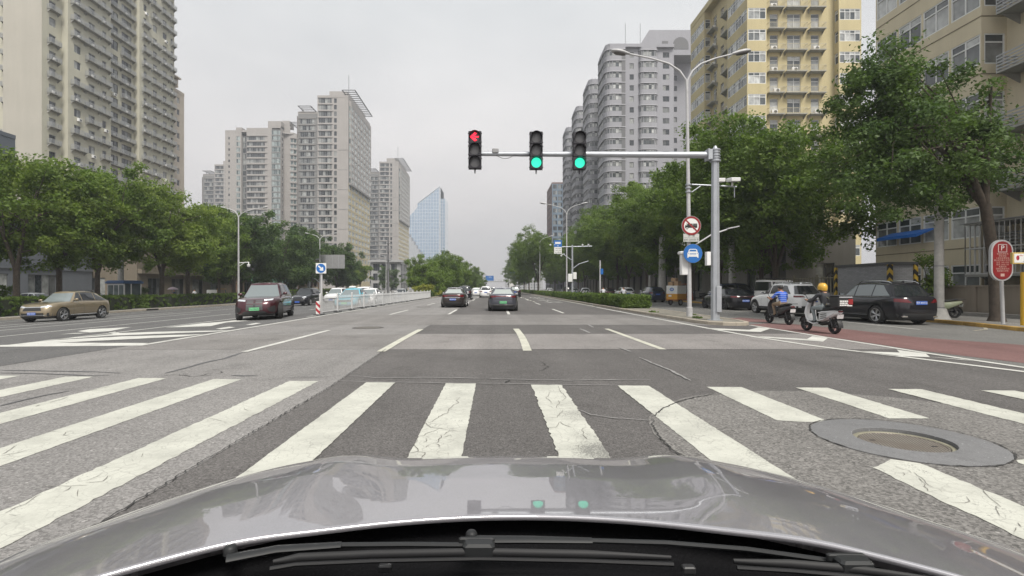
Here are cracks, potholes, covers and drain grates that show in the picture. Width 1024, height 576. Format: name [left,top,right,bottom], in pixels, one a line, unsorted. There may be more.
crack [809,418,1021,530]
manhole cover [811,419,1015,467]
